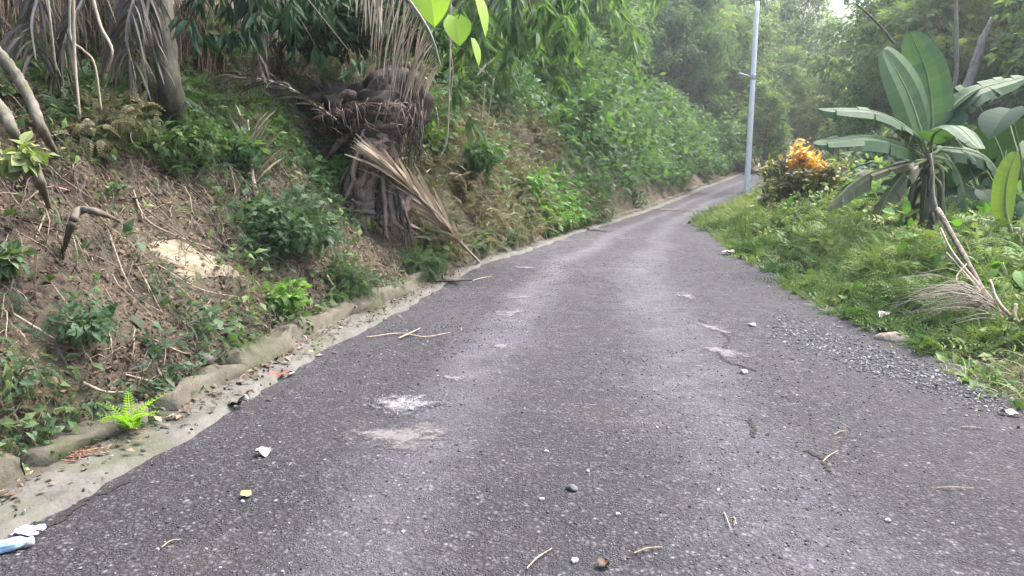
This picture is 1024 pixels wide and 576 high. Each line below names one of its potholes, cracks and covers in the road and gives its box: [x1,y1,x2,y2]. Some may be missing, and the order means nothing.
crack [698,319,756,370]
crack [803,450,832,474]
crack [748,417,758,437]
